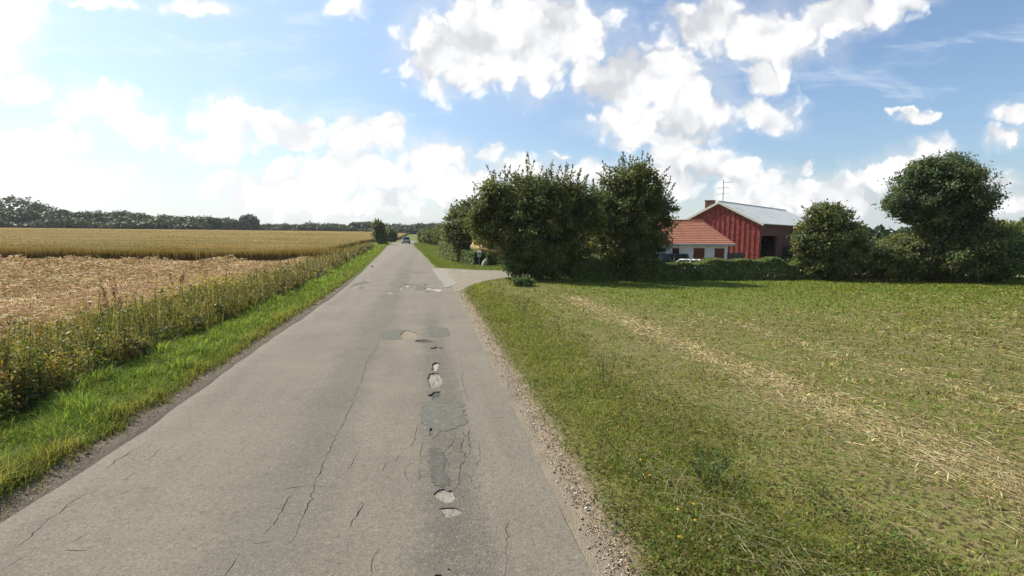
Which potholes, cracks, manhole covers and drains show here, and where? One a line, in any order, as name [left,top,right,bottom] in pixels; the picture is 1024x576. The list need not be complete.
pothole [427,373,443,388]
crack [225,343,378,576]
crack [9,498,86,565]
crack [445,428,481,498]
pothole [439,507,463,517]
pothole [401,330,418,339]
pothole [433,489,456,503]
